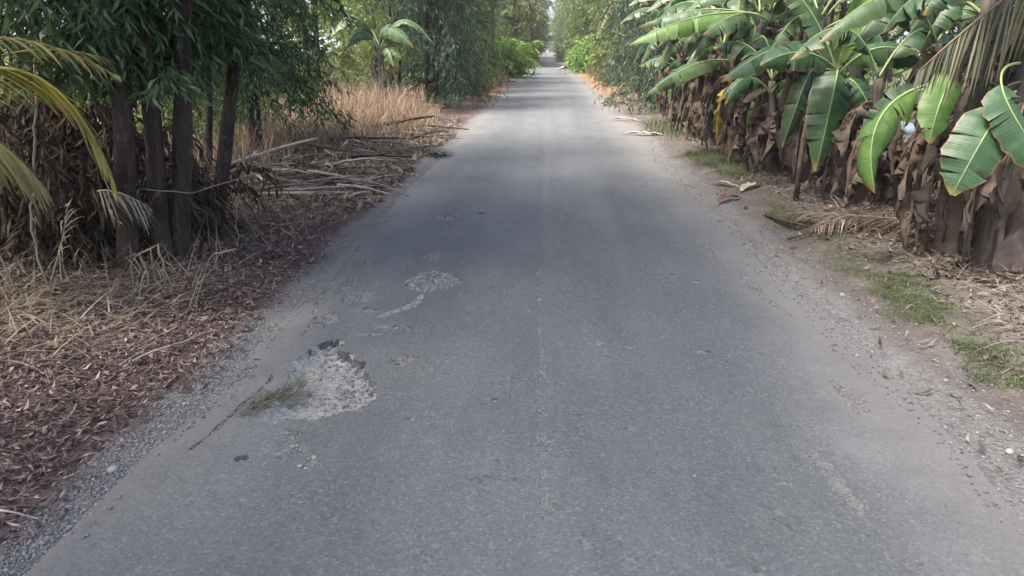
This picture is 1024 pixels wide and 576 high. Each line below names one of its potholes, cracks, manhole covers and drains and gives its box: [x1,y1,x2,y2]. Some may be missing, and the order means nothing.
pothole [260,338,378,424]
crack [183,369,286,455]
pothole [399,270,460,292]
